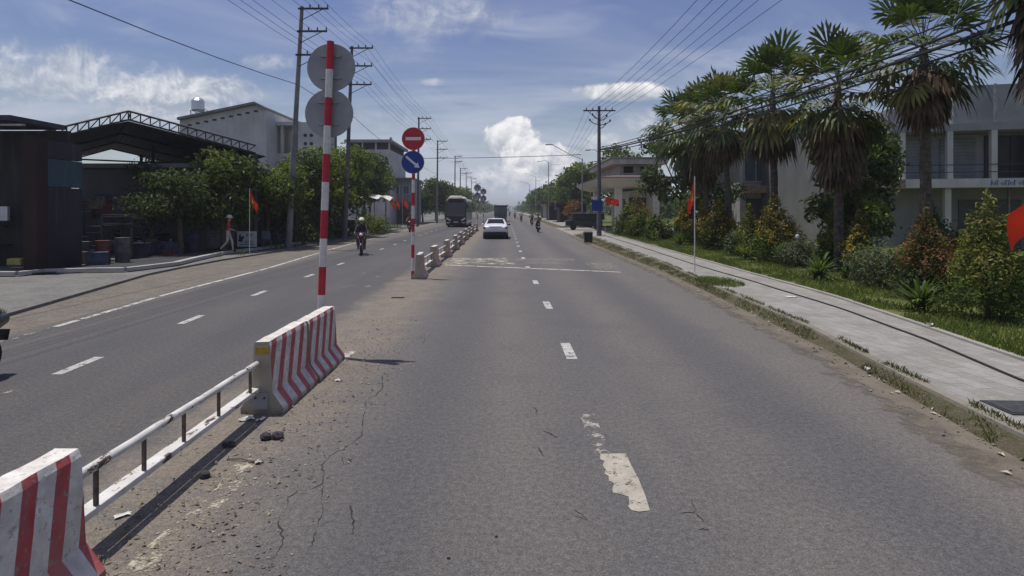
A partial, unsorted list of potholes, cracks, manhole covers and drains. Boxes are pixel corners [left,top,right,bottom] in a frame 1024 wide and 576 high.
crack [270,374,386,560]
